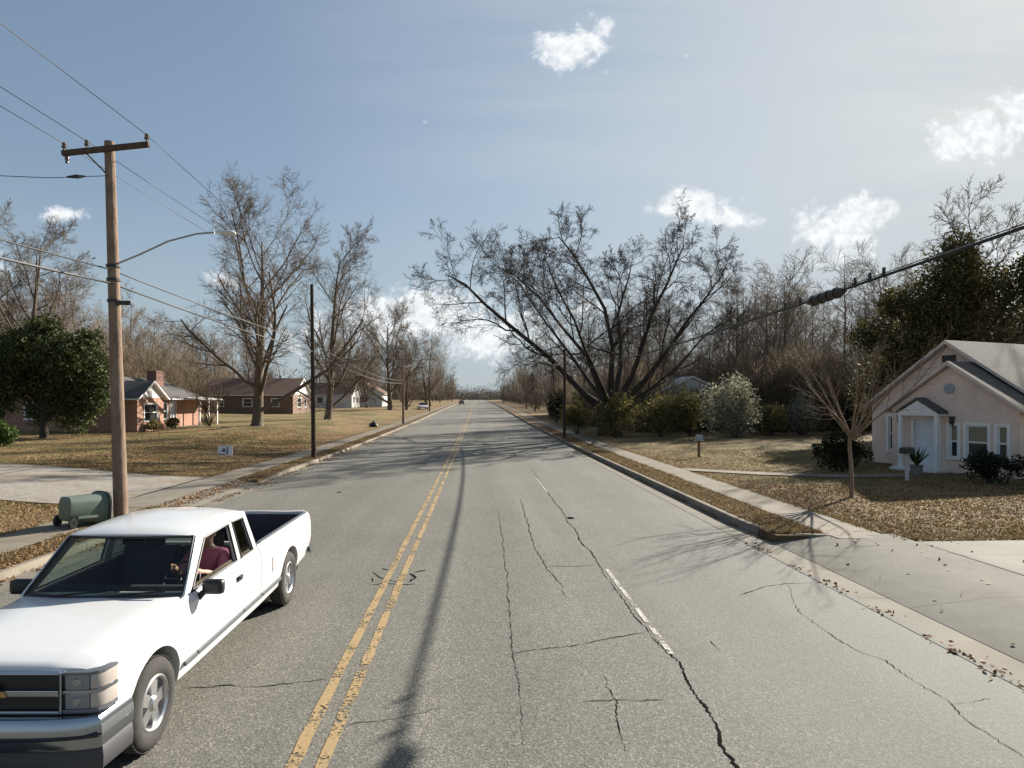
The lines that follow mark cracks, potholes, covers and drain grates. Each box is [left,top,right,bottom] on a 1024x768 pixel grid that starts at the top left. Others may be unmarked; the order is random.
crack [740,583,1021,754]
crack [496,468,740,768]
crack [372,568,424,585]
crack [185,679,321,688]
